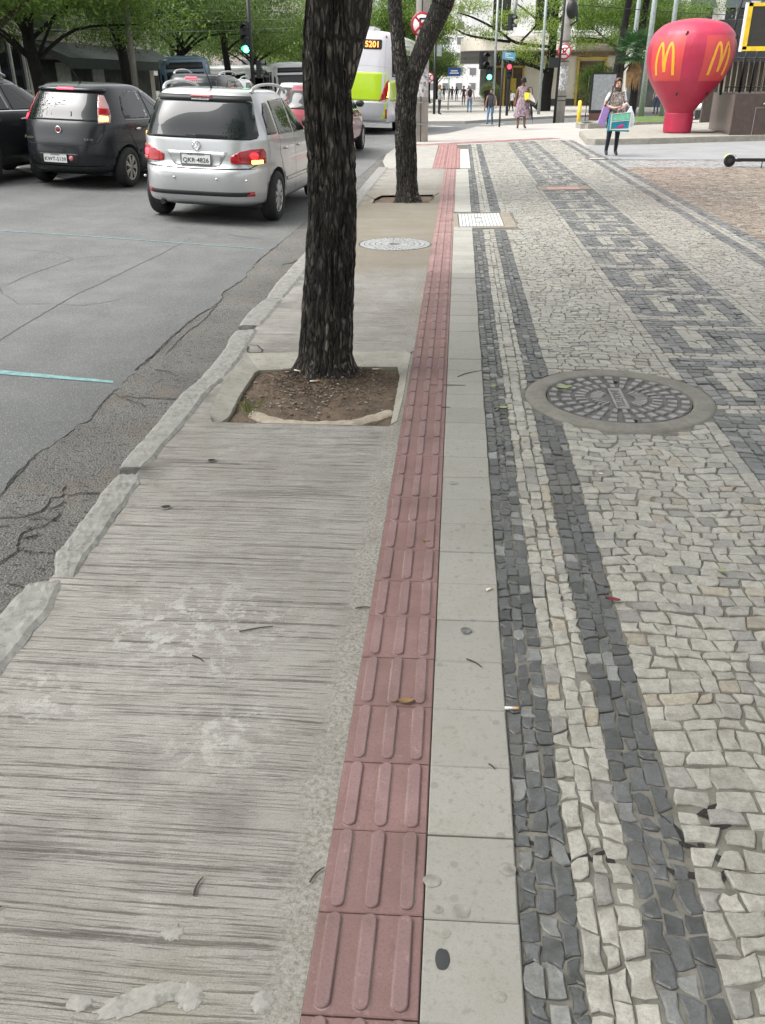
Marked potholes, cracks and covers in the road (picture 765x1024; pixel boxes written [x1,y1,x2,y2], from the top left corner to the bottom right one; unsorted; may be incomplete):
manhole cover [525,370,716,433]
crack [0,486,102,589]
manhole cover [358,238,432,251]
crack [117,395,177,408]
